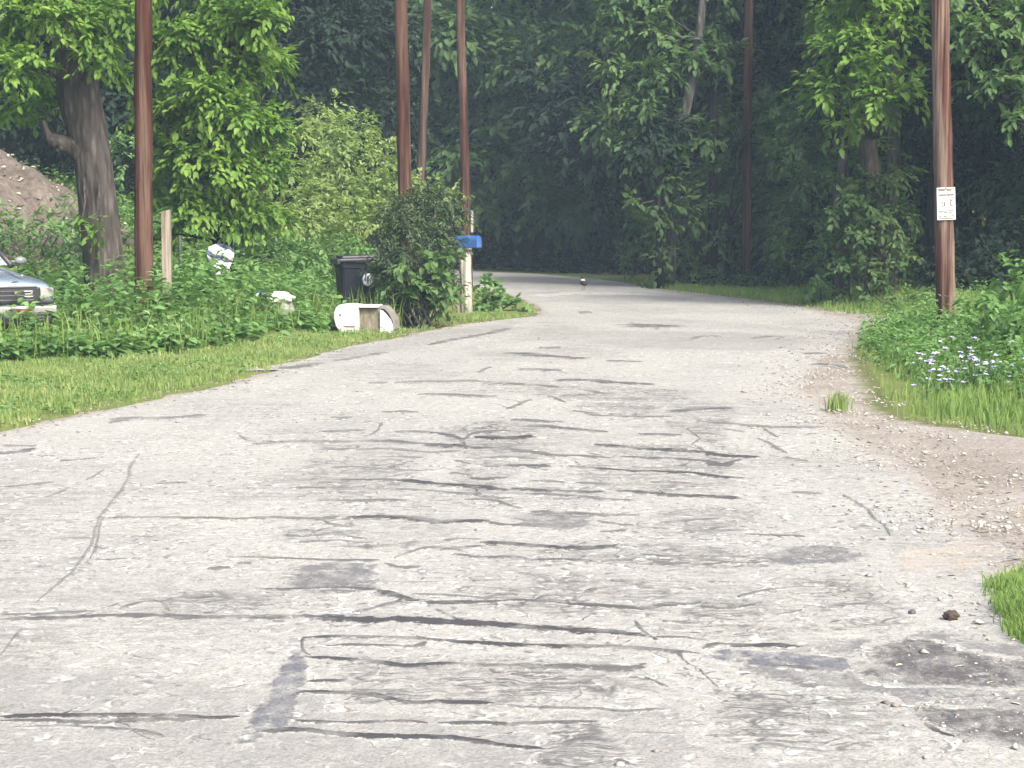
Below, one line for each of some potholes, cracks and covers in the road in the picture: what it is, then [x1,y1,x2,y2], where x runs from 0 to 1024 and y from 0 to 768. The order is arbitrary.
crack [616,322,723,340]
crack [749,335,850,369]
crack [923,722,955,737]
crack [830,494,891,535]
crack [0,328,822,751]
